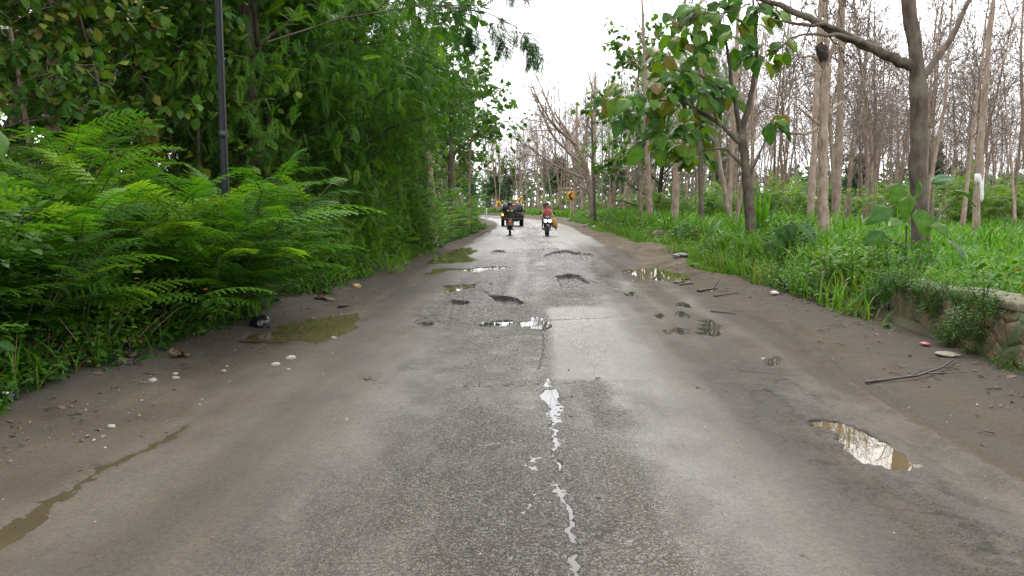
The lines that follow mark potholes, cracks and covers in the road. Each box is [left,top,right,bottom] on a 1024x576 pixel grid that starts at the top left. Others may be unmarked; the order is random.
pothole [511,316,552,330]
crack [414,317,607,370]
pothole [442,284,476,292]
pothole [804,418,923,472]
pothole [543,250,596,261]
pothole [489,295,526,307]
pothole [555,273,591,288]
pothole [475,319,514,327]
